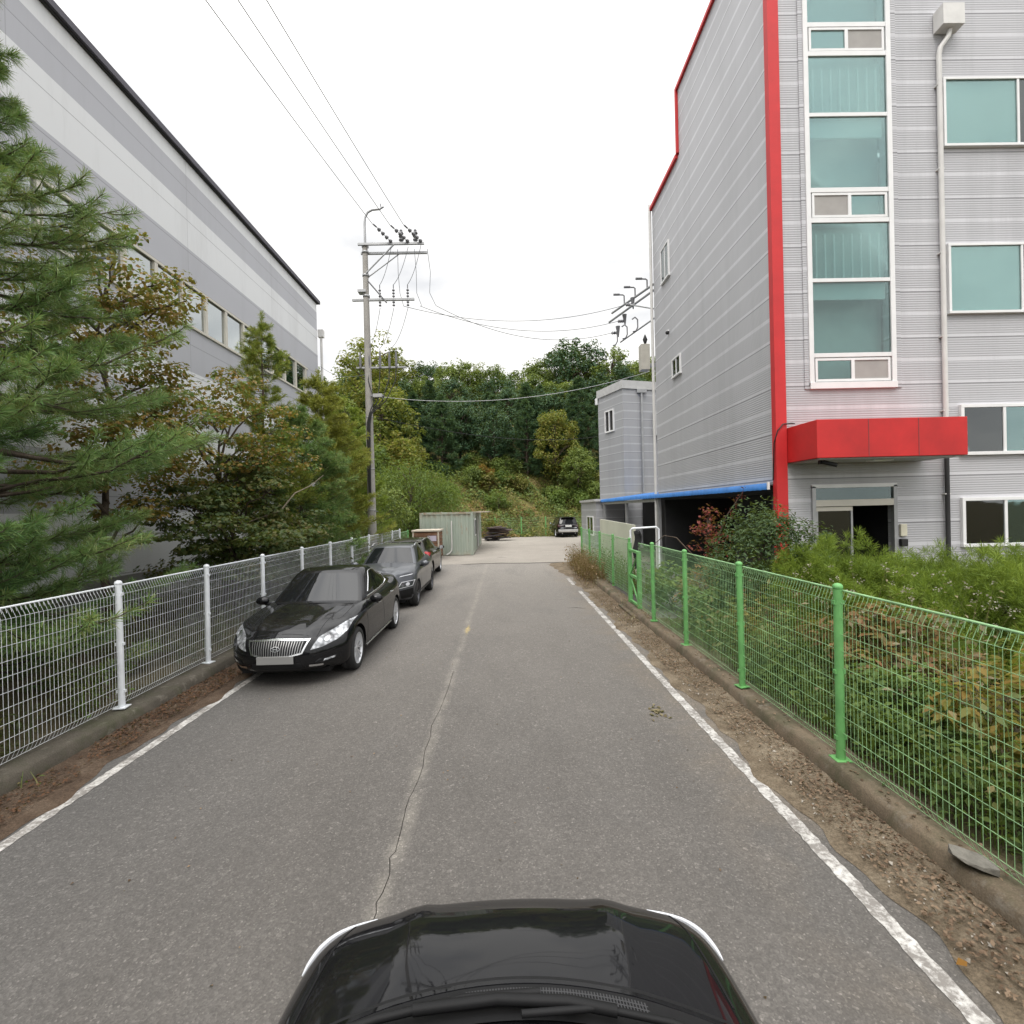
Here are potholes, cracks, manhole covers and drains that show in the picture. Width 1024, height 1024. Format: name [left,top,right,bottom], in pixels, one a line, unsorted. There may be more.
crack [373,671,454,920]
